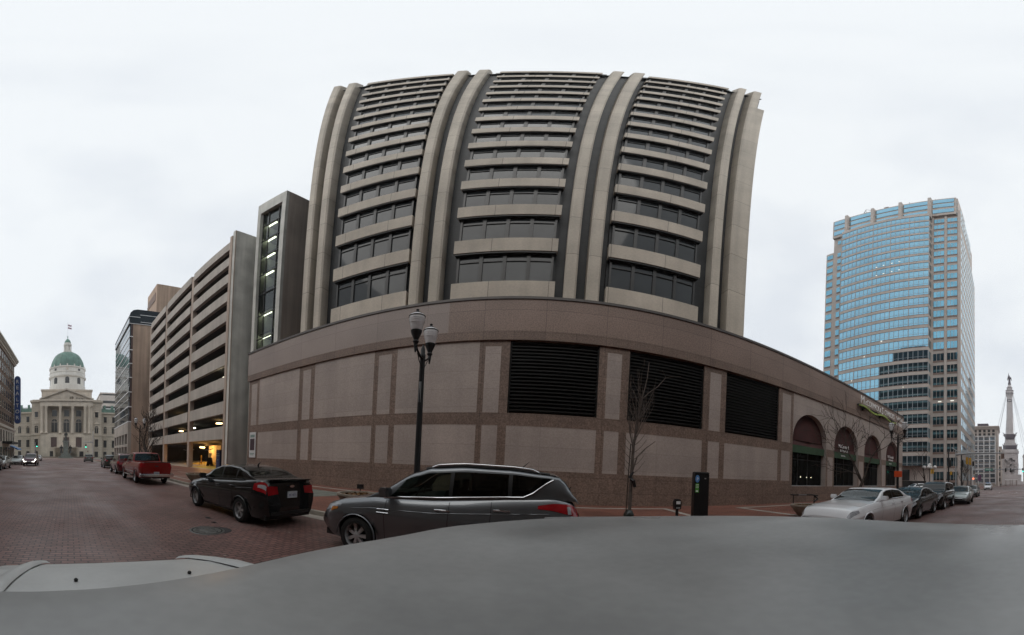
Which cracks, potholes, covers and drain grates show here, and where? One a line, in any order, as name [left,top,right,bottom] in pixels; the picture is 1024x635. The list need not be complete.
manhole cover [189,526,232,535]
